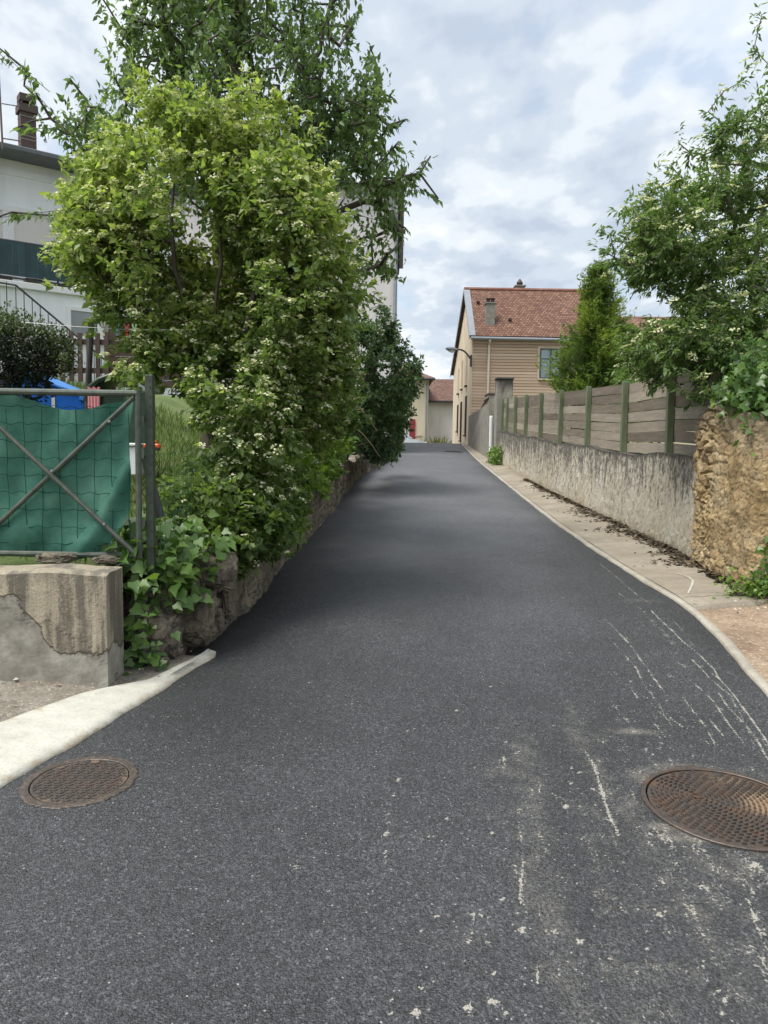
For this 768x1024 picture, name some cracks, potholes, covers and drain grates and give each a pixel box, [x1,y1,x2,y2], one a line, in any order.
manhole cover [641,765,768,853]
manhole cover [18,756,138,809]
